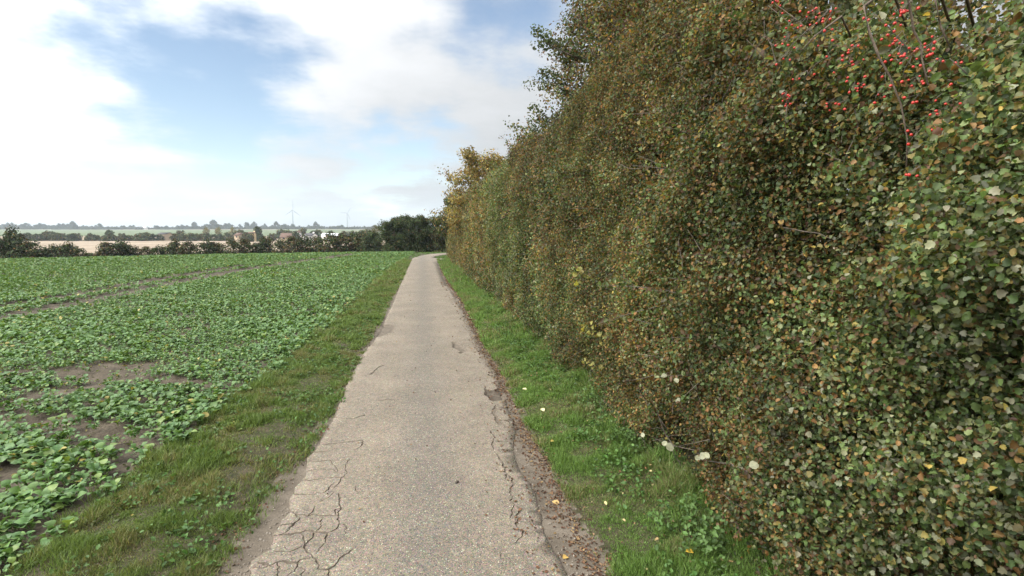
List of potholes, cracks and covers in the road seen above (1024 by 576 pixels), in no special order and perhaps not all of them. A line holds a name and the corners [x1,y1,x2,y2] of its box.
crack [477,405,524,559]
crack [254,440,364,576]
pothole [484,387,502,401]
